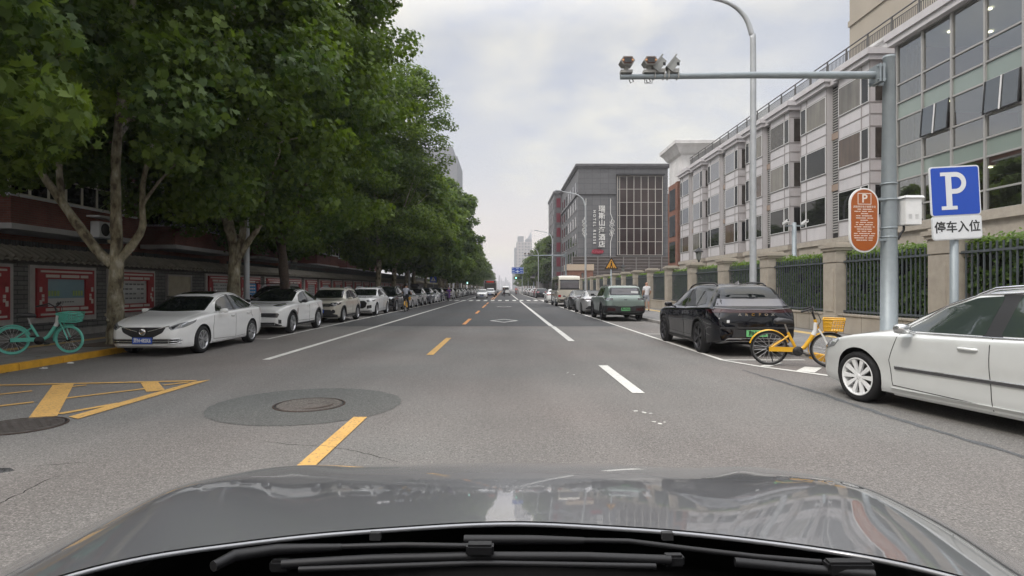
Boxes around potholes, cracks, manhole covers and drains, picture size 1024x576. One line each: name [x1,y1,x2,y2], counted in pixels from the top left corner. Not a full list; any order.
manhole cover [272,398,346,412]
crack [1,462,83,503]
manhole cover [0,416,70,435]
